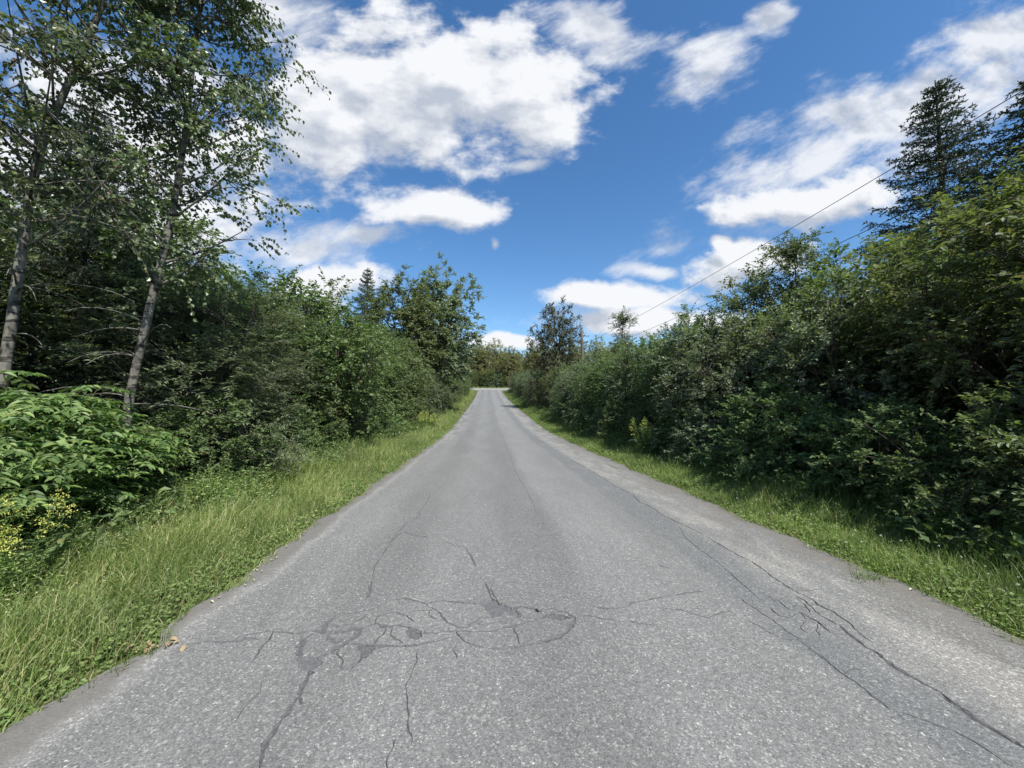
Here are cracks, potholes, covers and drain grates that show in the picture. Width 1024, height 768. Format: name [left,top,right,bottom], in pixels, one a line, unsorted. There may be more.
crack [186,461,1024,768]
